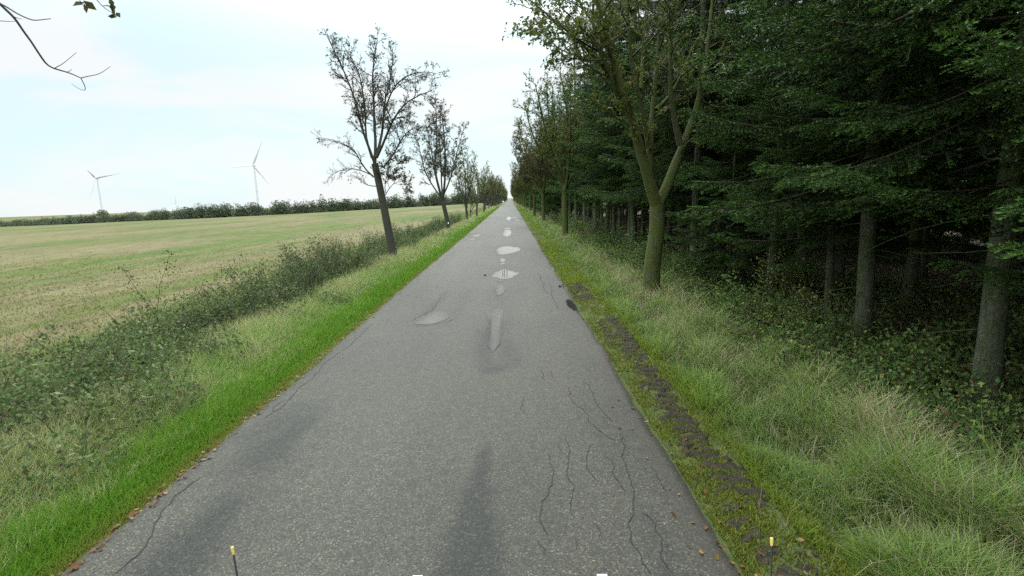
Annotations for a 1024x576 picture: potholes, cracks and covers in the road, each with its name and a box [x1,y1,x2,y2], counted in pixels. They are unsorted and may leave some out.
crack [113,478,199,575]
crack [539,371,674,574]
